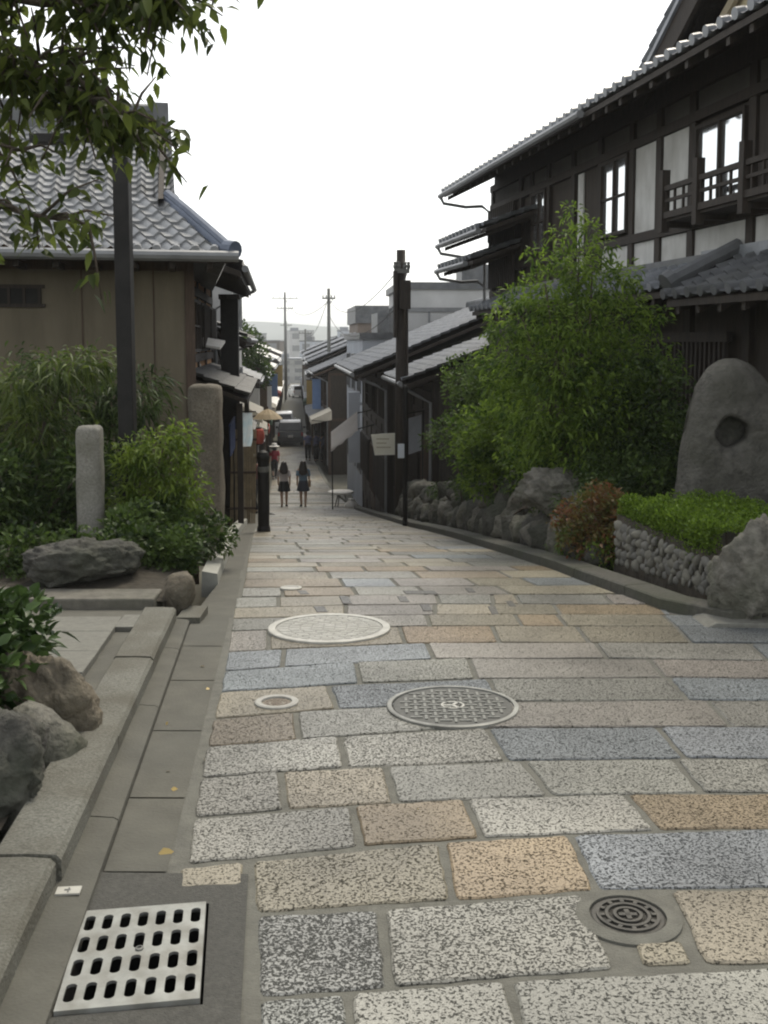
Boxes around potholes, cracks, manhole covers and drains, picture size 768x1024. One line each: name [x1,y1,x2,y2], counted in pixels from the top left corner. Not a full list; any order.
manhole cover [268,613,390,644]
manhole cover [387,685,519,730]
manhole cover [255,694,299,710]
drain grate [53,901,206,1017]
manhole cover [576,890,683,947]
